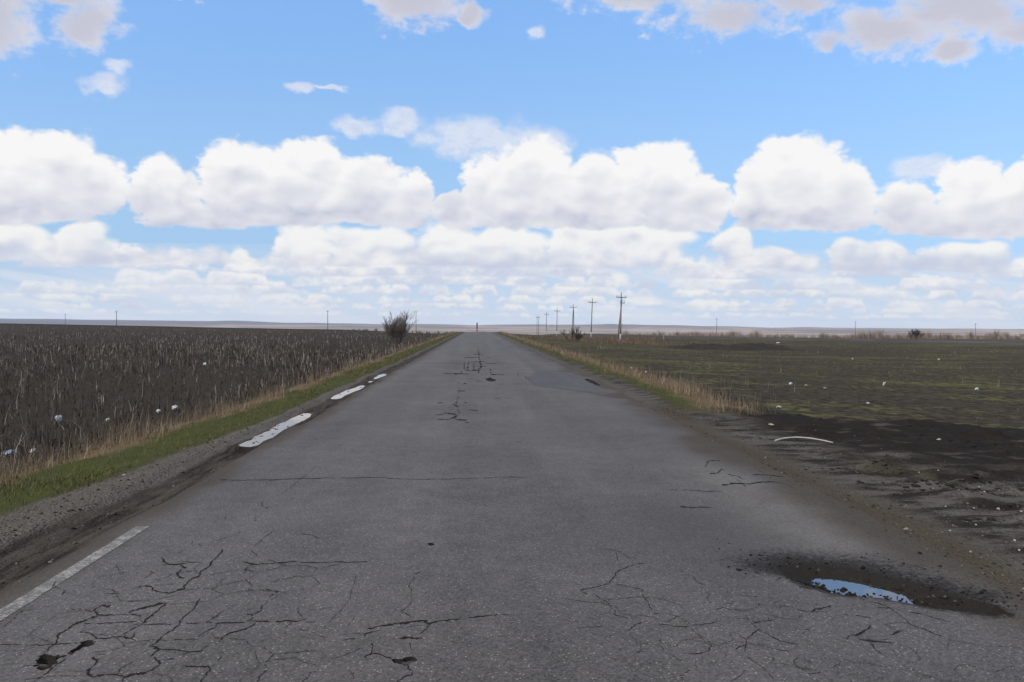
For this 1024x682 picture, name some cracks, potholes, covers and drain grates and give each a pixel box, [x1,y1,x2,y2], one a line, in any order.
crack [567,548,1017,682]
crack [0,531,366,682]
